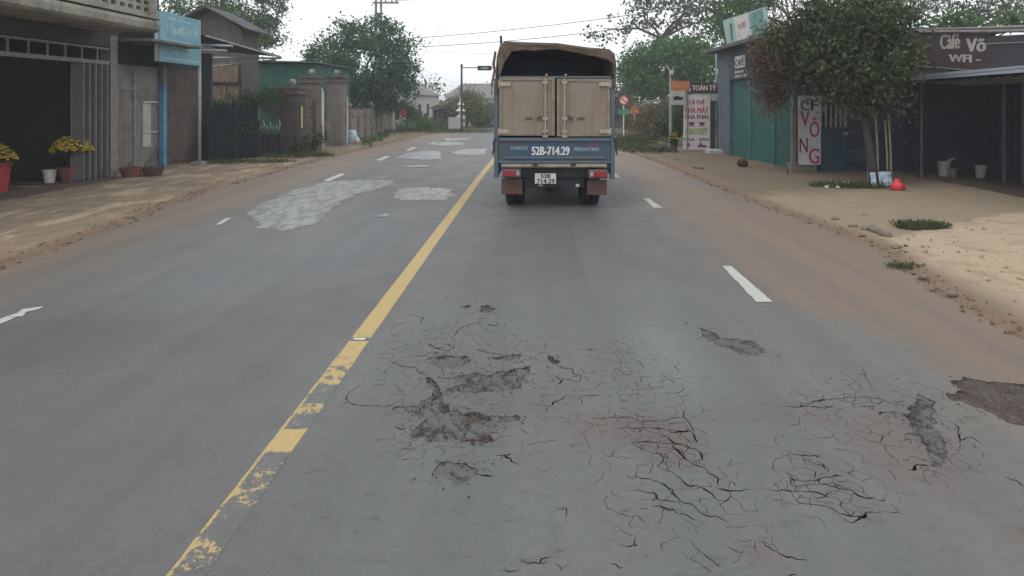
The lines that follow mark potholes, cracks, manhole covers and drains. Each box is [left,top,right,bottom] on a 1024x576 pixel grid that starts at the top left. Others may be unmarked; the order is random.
pothole [700,328,766,357]
pothole [946,377,1024,426]
crack [566,340,808,576]
pothole [430,355,470,369]
crack [504,557,562,572]
crack [768,369,986,527]
crack [343,313,647,477]
pothole [432,461,478,484]
pothole [393,377,520,446]
pothole [902,395,949,468]
pothole [446,366,530,395]
